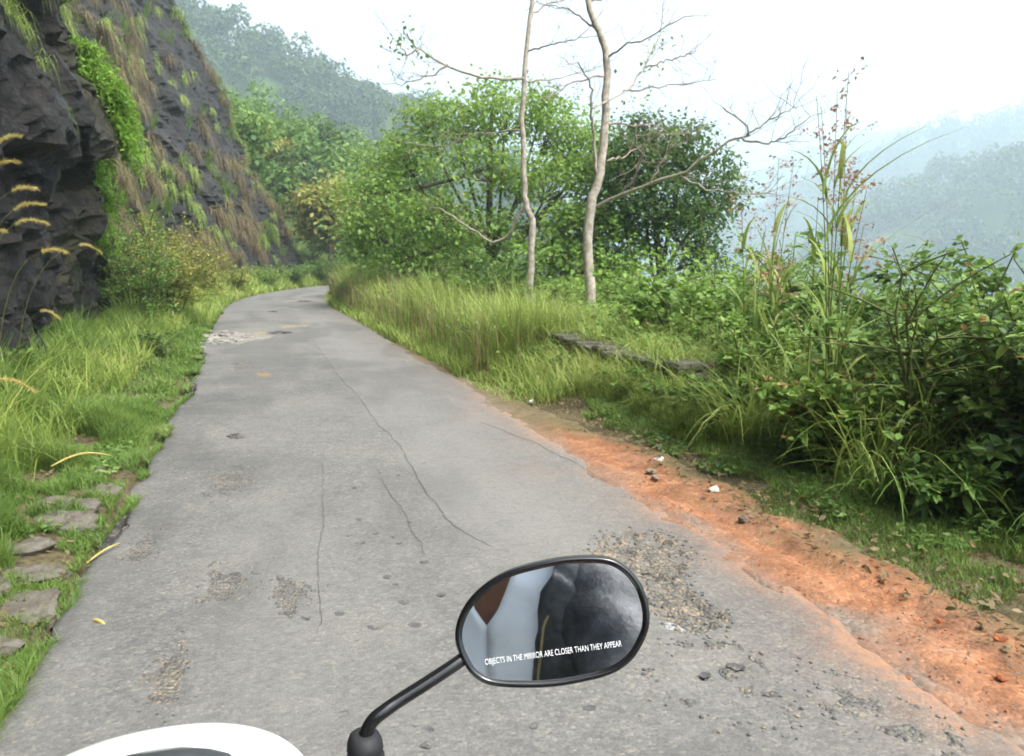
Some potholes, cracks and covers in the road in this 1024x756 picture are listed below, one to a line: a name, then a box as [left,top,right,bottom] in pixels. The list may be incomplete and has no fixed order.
crack [313,340,490,546]
pothole [583,526,713,594]
